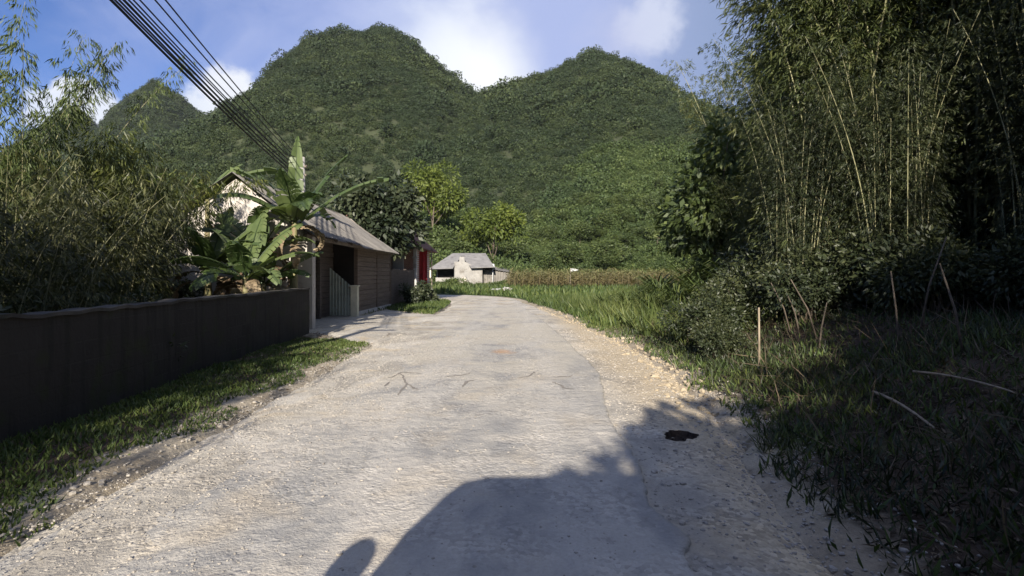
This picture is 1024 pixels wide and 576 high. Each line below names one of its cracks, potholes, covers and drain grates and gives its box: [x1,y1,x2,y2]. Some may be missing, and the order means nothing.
pothole [656,427,710,445]
crack [384,372,418,395]
